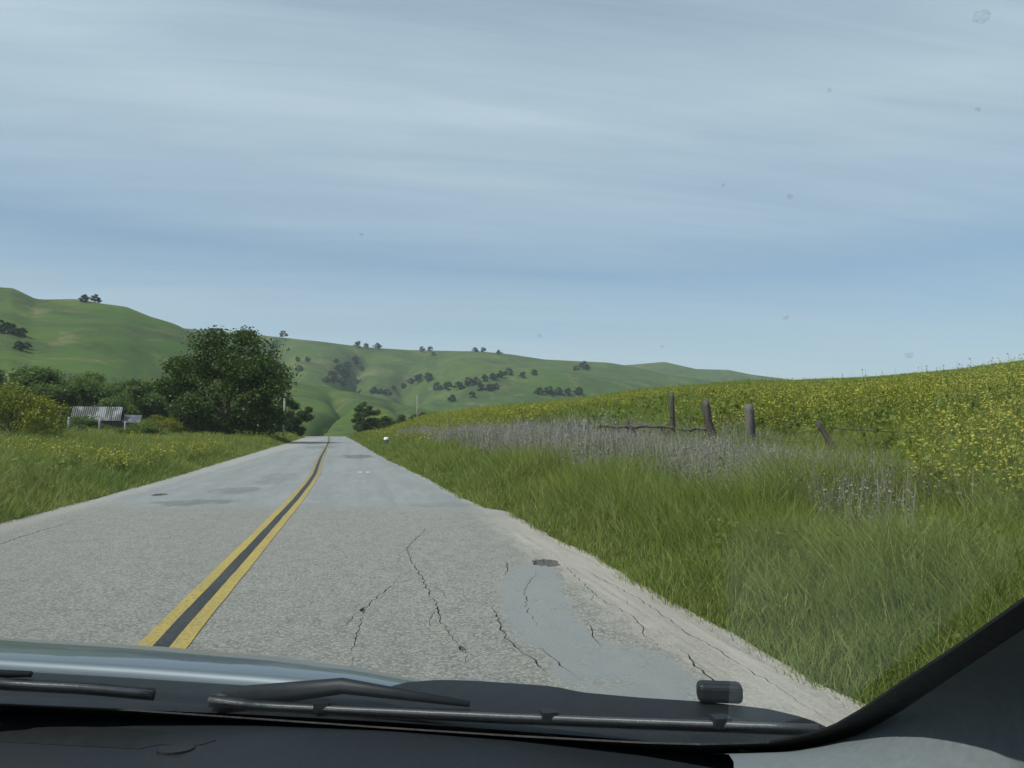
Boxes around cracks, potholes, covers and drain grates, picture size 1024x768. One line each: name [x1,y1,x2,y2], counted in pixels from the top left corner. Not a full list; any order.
crack [574,575,795,699]
crack [349,545,468,662]
pothole [532,559,560,567]
